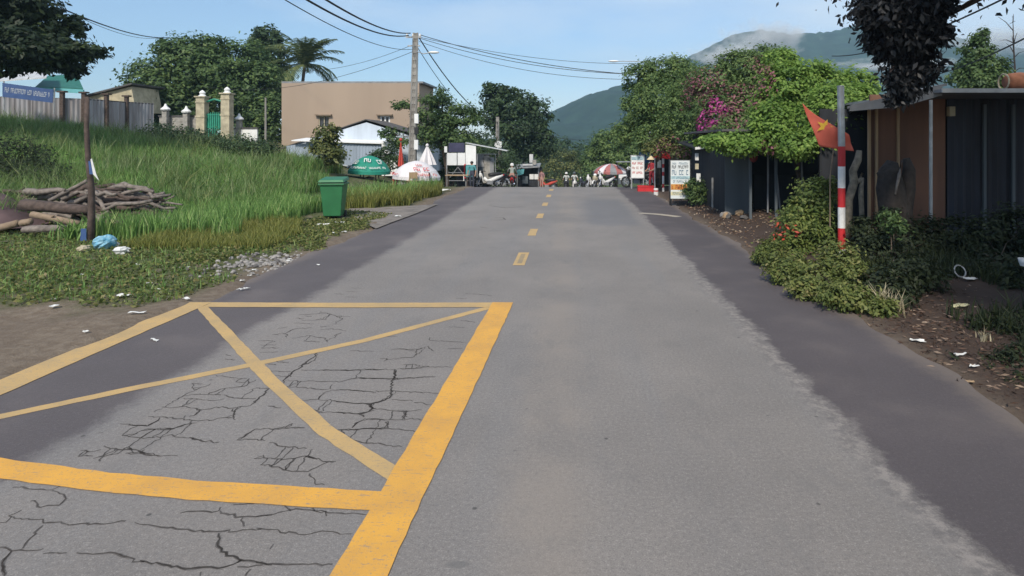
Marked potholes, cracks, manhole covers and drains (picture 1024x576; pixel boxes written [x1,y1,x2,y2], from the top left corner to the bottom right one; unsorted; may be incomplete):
crack [0,486,367,576]
crack [78,312,475,485]
